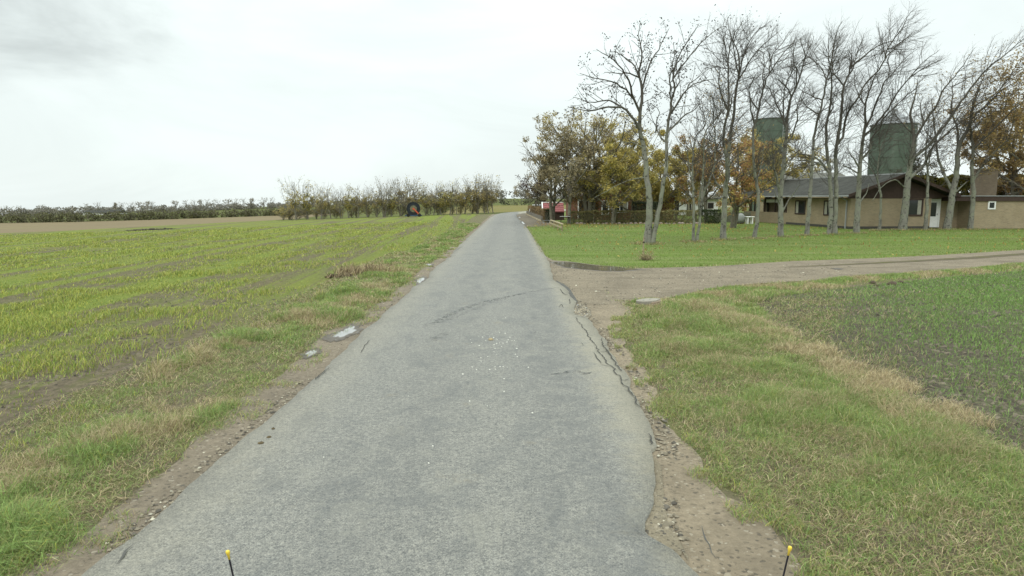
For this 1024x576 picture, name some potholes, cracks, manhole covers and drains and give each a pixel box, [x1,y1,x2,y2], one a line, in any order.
manhole cover [636,298,663,307]
crack [555,289,643,406]
